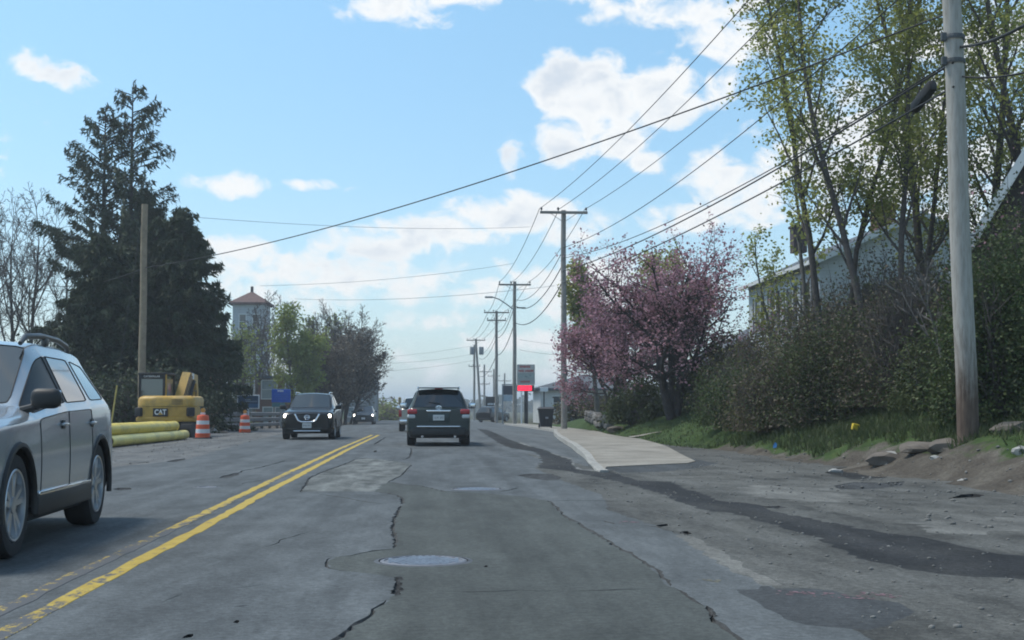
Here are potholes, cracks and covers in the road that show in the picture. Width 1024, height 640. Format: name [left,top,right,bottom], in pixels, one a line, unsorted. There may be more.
crack [240,438,449,572]
crack [331,600,386,640]
crack [548,500,744,640]
pothole [835,481,905,489]
manhole cover [374,555,473,567]
